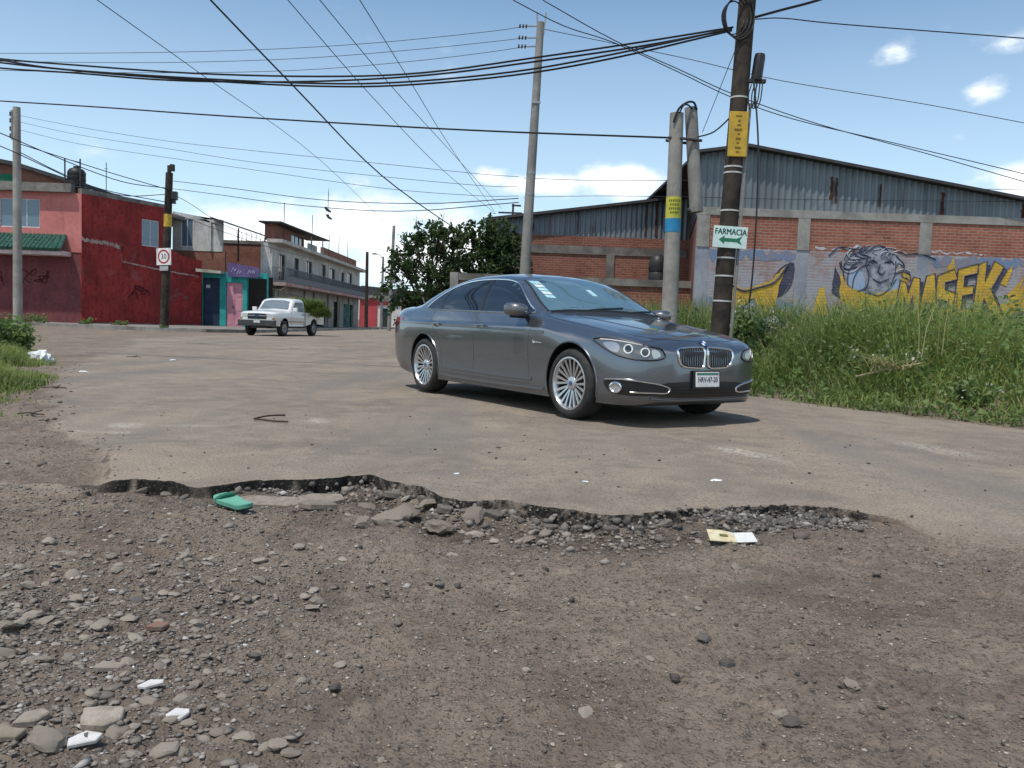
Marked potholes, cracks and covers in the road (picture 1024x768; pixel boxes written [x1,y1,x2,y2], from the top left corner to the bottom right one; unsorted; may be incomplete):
pothole [71,475,920,568]
